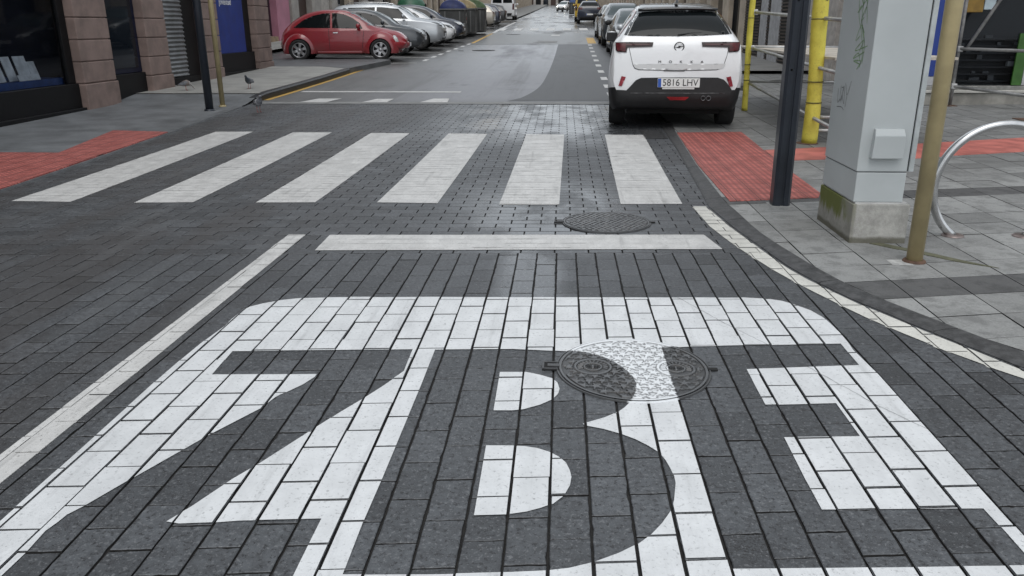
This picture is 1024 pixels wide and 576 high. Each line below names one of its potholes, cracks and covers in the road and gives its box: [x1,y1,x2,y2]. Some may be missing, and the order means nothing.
manhole cover [554,212,655,234]
manhole cover [542,339,718,404]
